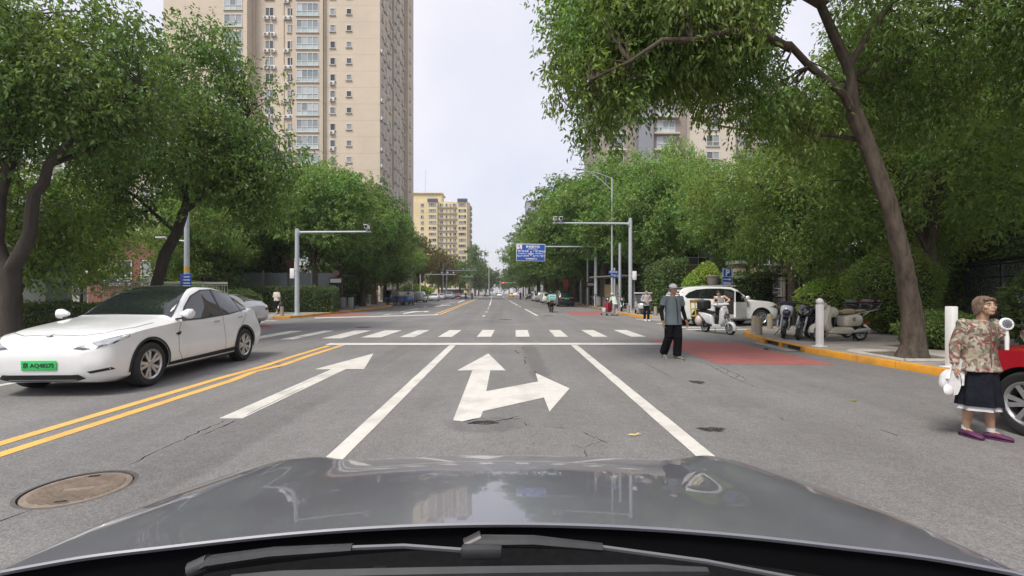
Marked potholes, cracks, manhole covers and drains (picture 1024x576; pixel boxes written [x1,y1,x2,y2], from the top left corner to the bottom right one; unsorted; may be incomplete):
crack [132,420,234,464]
crack [468,416,607,456]
manhole cover [10,470,139,510]
